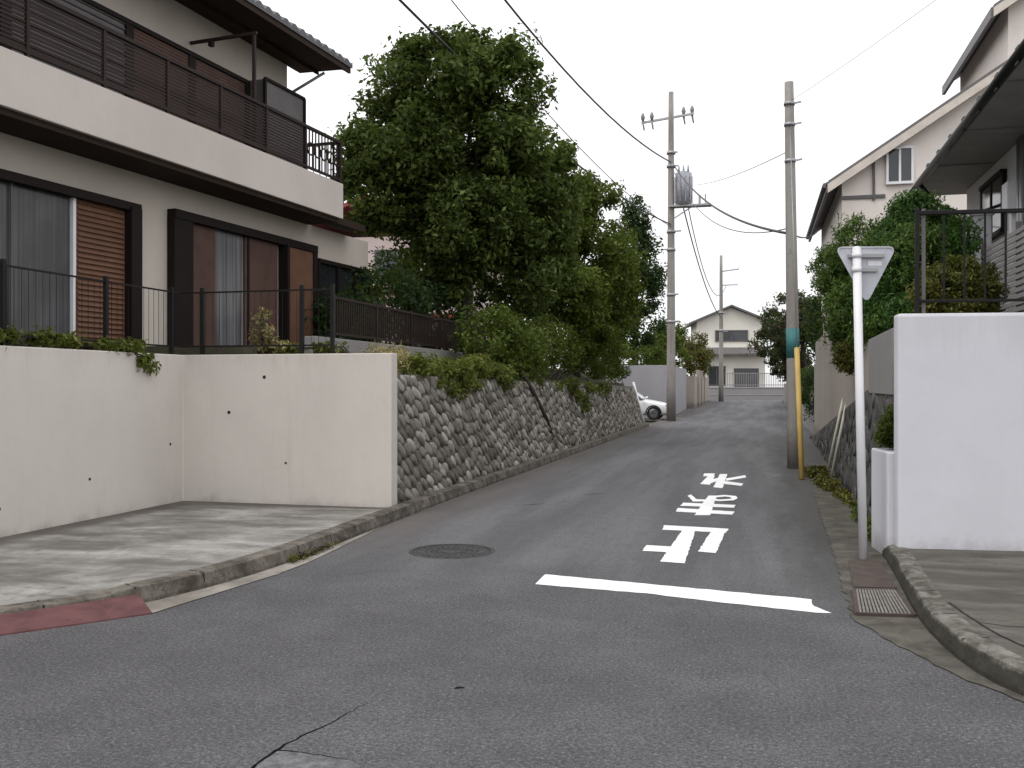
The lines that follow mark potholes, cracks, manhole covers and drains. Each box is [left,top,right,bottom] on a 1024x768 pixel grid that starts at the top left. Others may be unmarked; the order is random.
crack [251,703,367,768]
drain grate [852,588,916,618]
manhole cover [409,544,495,559]
